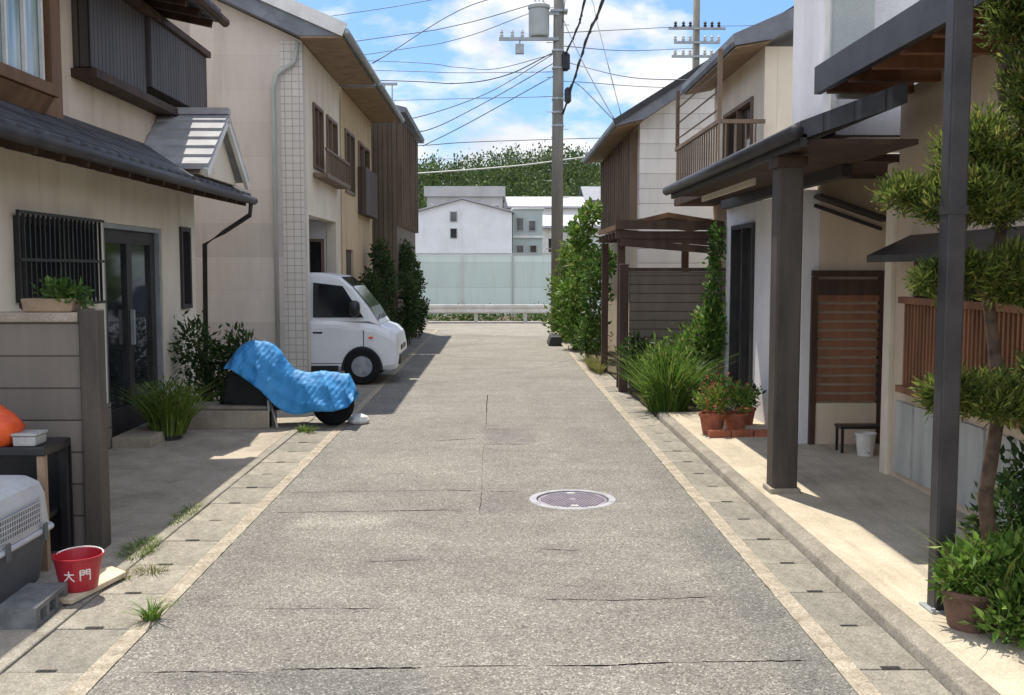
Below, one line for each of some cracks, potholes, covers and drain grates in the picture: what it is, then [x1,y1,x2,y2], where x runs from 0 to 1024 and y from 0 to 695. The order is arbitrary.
manhole cover [529,489,617,510]
crack [142,660,815,675]
